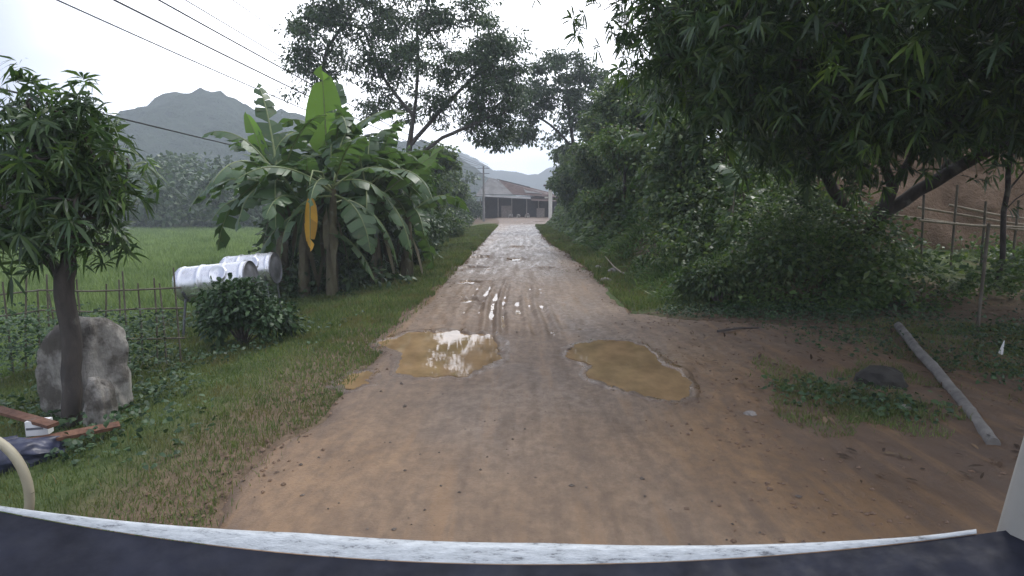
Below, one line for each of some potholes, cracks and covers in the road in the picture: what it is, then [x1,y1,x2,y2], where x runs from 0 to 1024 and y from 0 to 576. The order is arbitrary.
pothole [365,328,512,380]
pothole [559,338,701,406]
